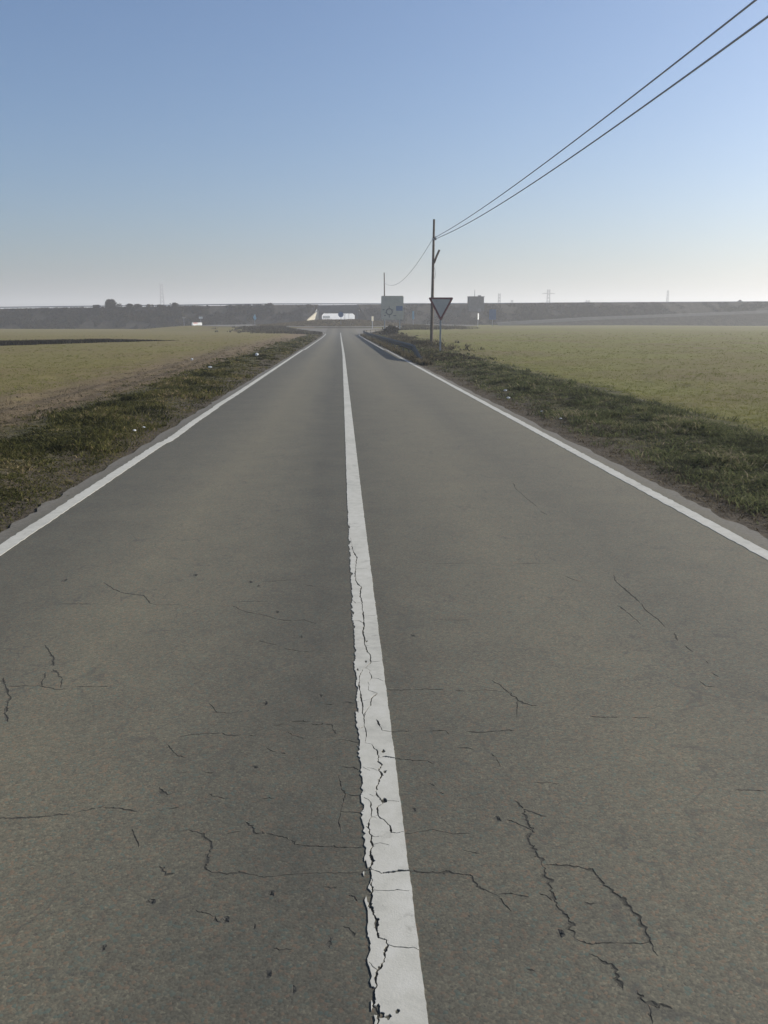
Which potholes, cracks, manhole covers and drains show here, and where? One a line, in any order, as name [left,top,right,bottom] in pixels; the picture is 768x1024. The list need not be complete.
crack [159,546,673,1024]
crack [613,575,719,688]
crack [0,645,107,722]
crack [0,806,138,819]
